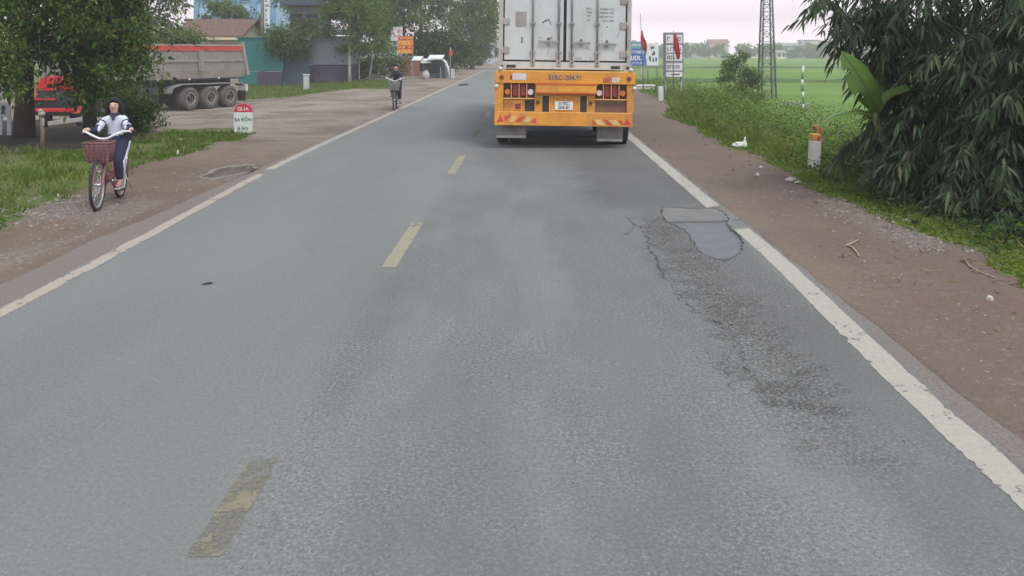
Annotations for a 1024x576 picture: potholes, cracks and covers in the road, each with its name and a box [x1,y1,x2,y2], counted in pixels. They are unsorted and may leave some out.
crack [624,217,806,400]
